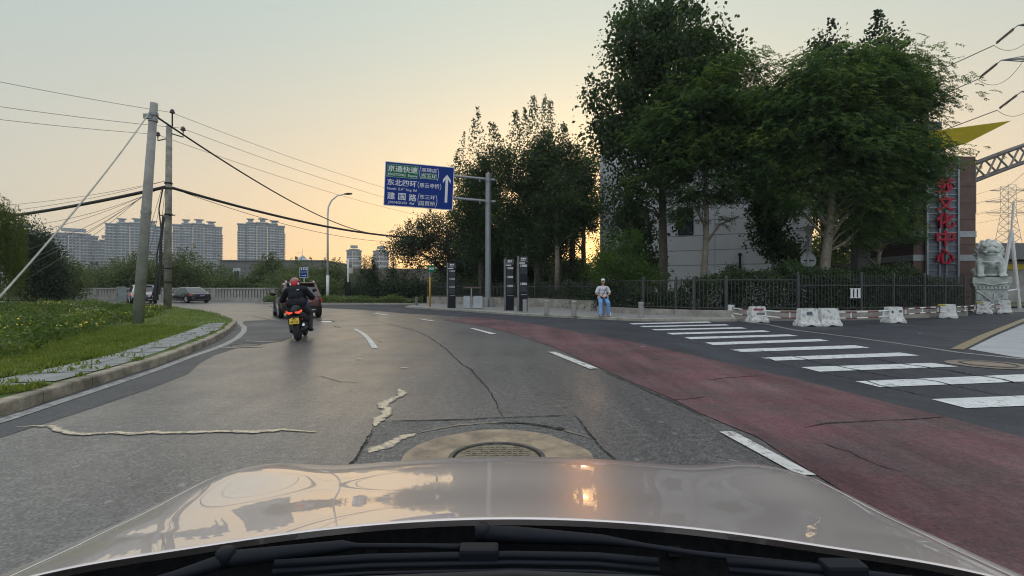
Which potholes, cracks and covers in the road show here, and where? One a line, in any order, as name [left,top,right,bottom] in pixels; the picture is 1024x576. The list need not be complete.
manhole cover [959,360,1020,368]
crack [372,320,565,429]
crack [807,416,943,471]
